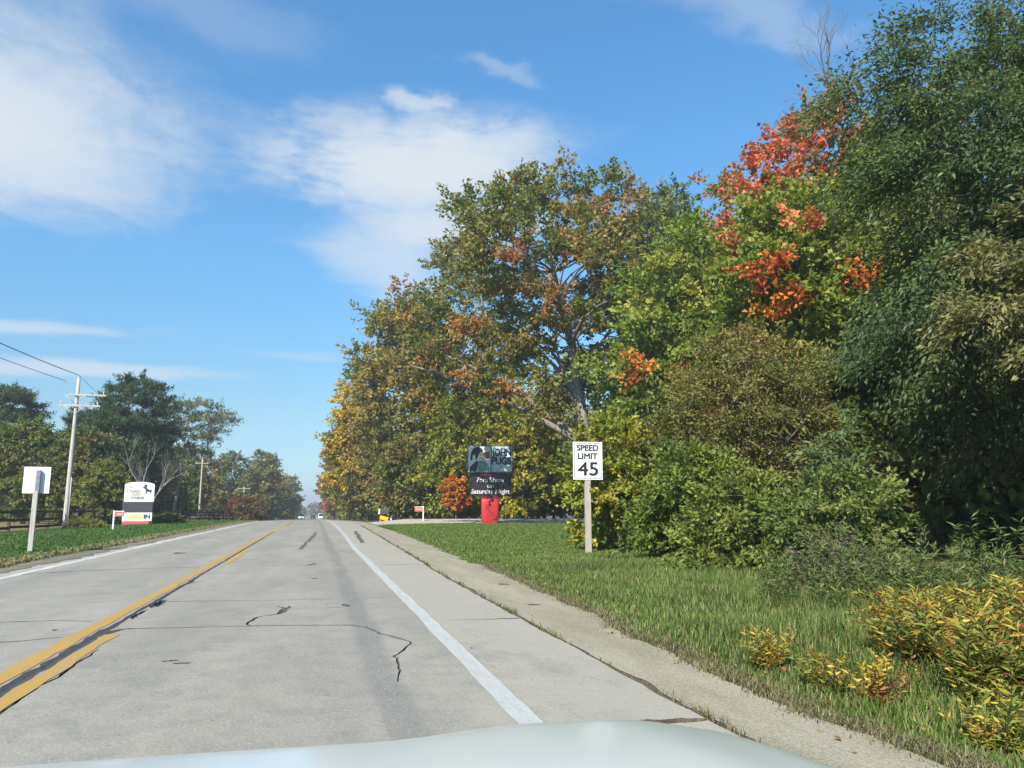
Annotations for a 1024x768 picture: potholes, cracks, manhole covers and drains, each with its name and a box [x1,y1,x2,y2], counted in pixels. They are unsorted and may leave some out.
crack [125,599,412,682]
